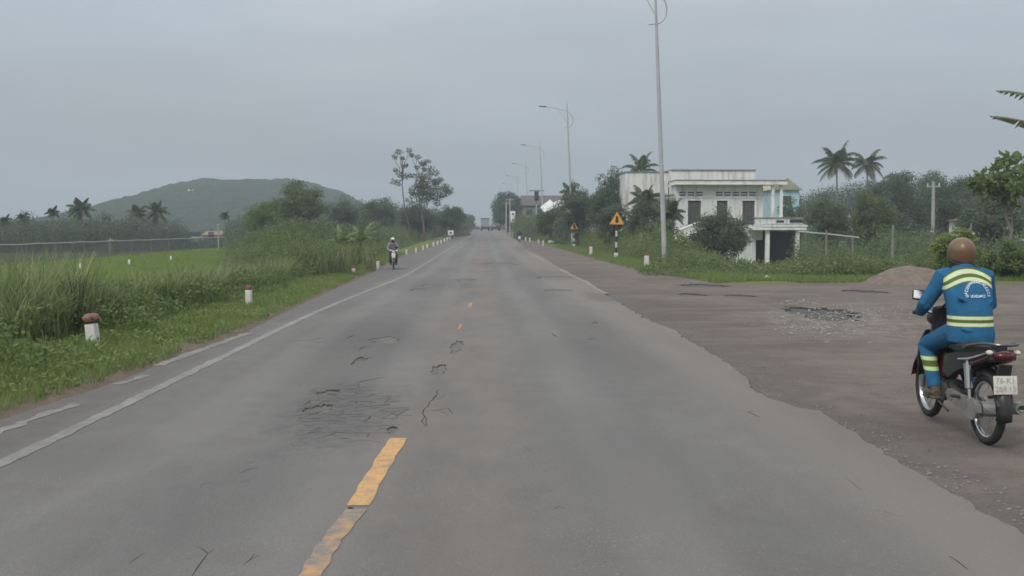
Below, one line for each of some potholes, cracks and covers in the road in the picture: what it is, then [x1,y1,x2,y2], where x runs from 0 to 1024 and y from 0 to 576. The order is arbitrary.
pothole [450,340,464,355]
crack [296,335,453,443]
pothole [779,306,862,321]
pothole [431,364,447,379]
